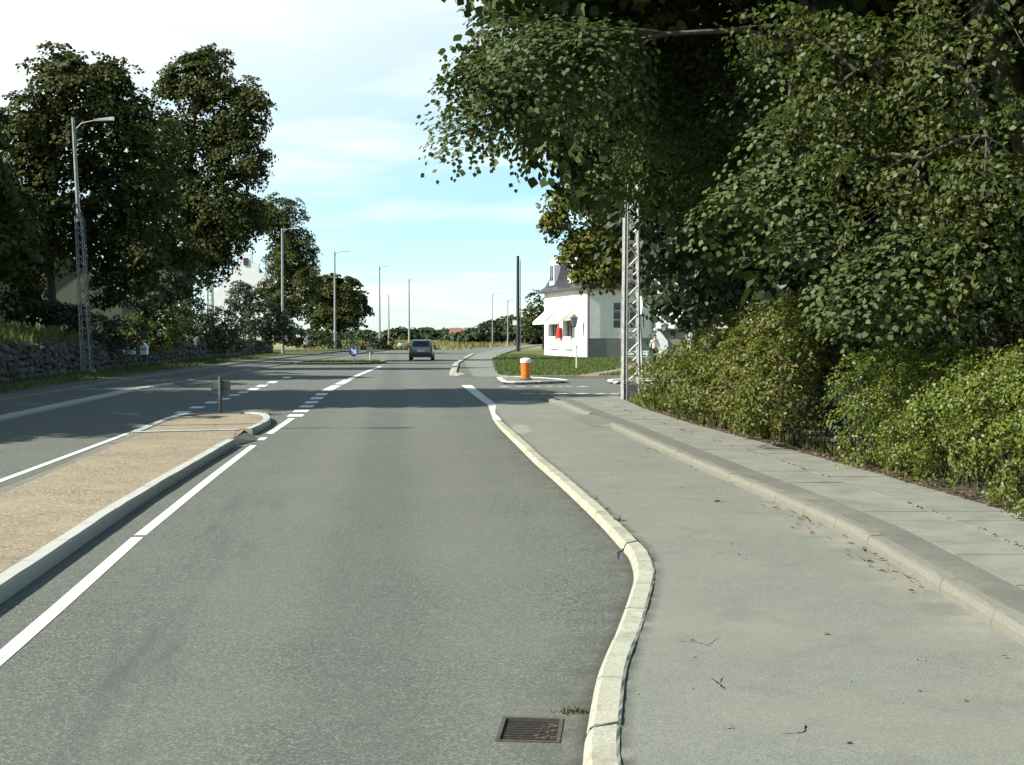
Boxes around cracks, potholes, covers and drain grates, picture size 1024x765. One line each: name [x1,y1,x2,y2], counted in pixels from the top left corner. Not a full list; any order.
drain grate [495,716,564,743]
